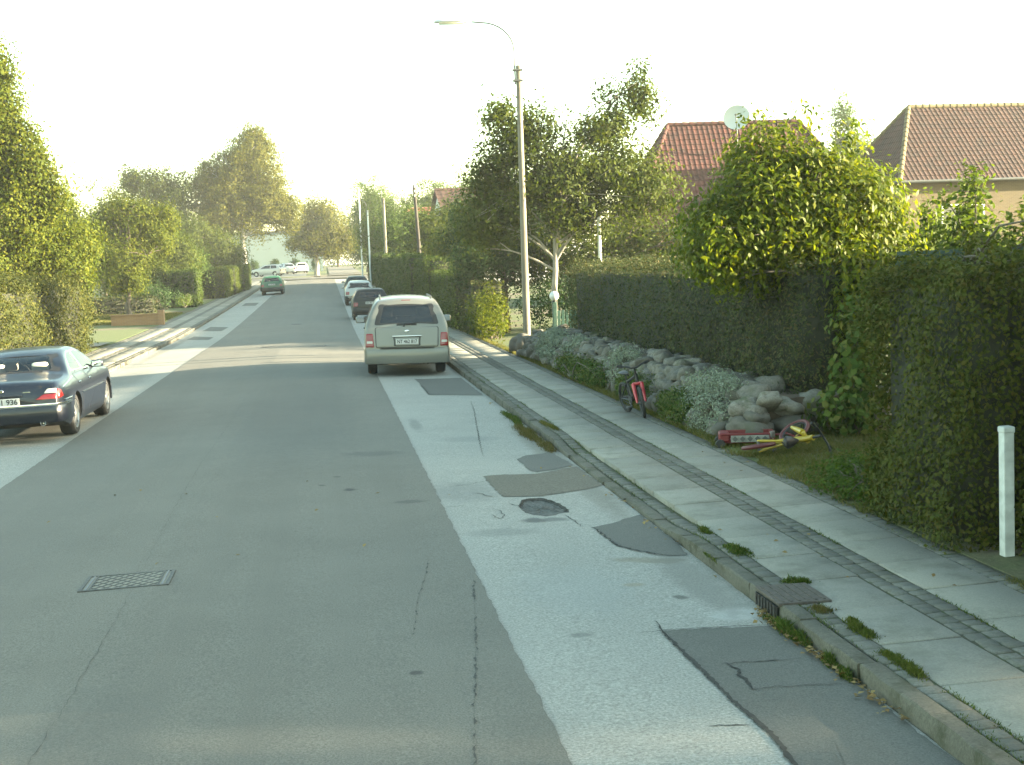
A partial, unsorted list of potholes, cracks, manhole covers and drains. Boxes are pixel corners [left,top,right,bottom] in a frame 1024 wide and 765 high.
crack [640,621,840,765]
pothole [518,498,569,516]
